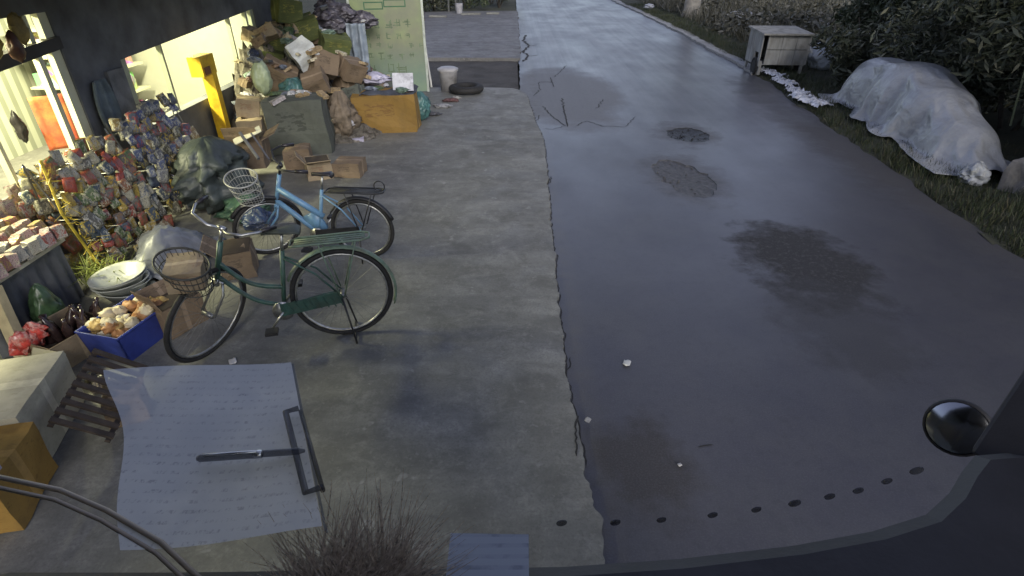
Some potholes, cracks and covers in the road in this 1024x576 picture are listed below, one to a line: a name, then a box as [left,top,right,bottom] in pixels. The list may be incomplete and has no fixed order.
pothole [651,159,717,198]
crack [533,66,634,465]
pothole [667,128,710,142]
